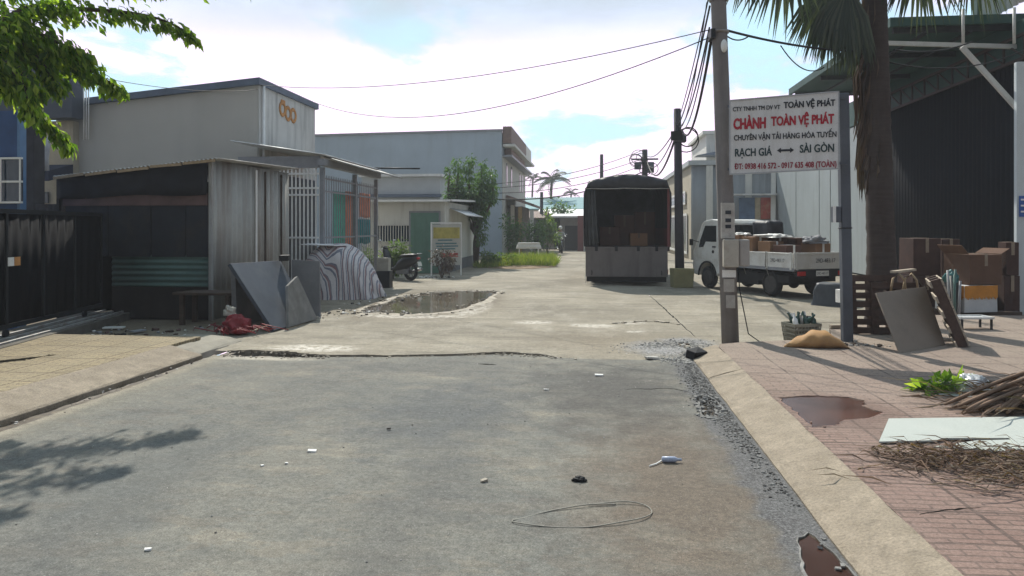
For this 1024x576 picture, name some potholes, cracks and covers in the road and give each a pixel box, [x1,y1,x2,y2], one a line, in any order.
crack [919,507,981,515]
pothole [777,394,886,428]
pothole [796,532,857,576]
pothole [342,289,505,316]
